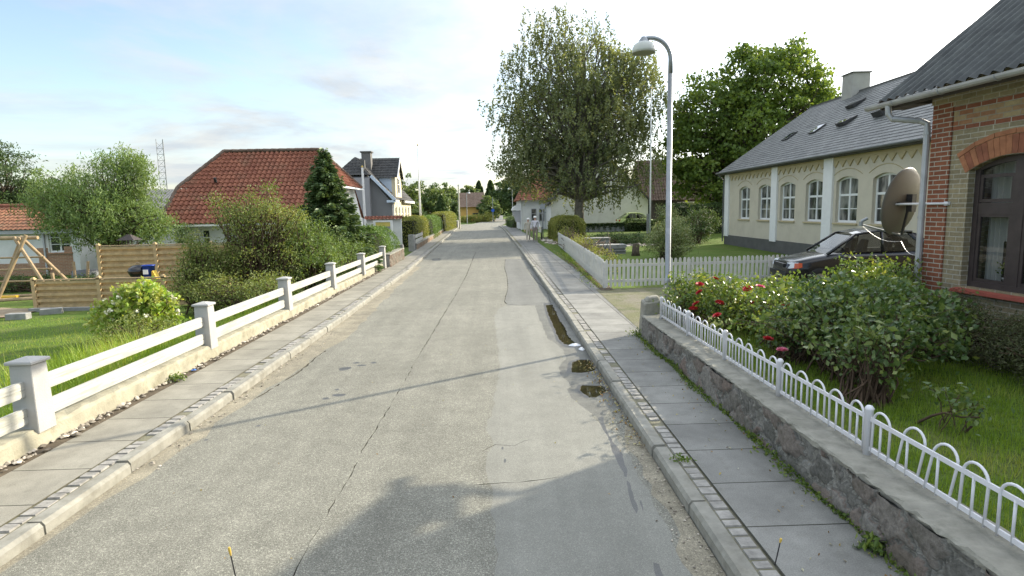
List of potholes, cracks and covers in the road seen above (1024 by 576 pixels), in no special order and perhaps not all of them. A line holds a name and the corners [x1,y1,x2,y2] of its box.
crack [293,252,476,576]
